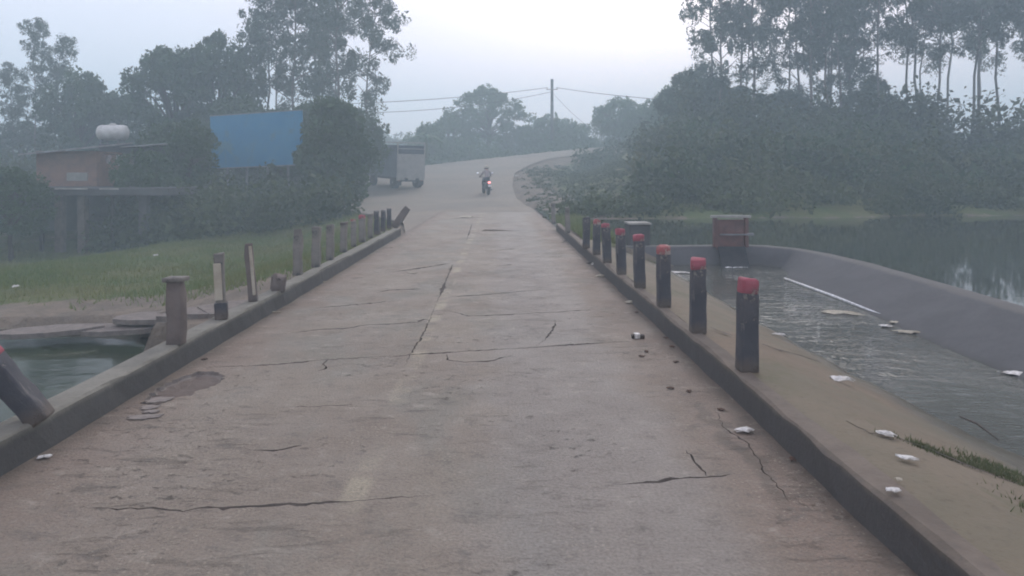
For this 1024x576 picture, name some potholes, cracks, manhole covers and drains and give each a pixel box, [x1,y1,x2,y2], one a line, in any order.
crack [226,356,381,371]
crack [79,495,428,512]
crack [284,290,631,362]
crack [616,451,730,485]
crack [714,408,788,500]
pothole [141,371,225,405]
